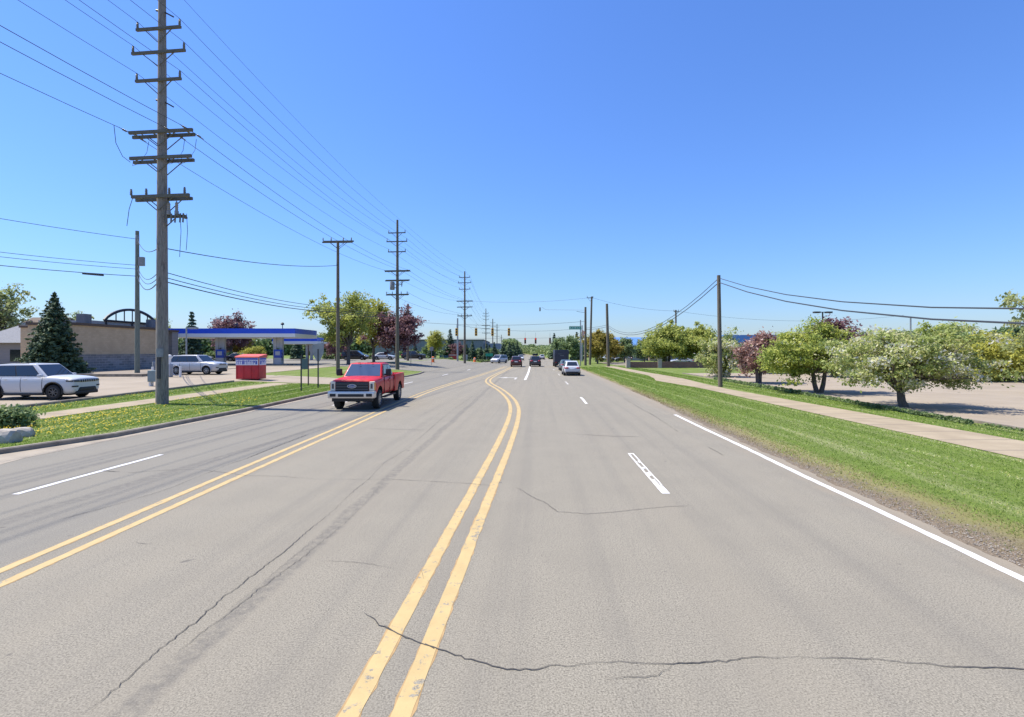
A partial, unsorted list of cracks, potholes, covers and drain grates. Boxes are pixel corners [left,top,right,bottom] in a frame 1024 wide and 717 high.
crack [364,612,1024,678]
crack [83,397,471,713]
